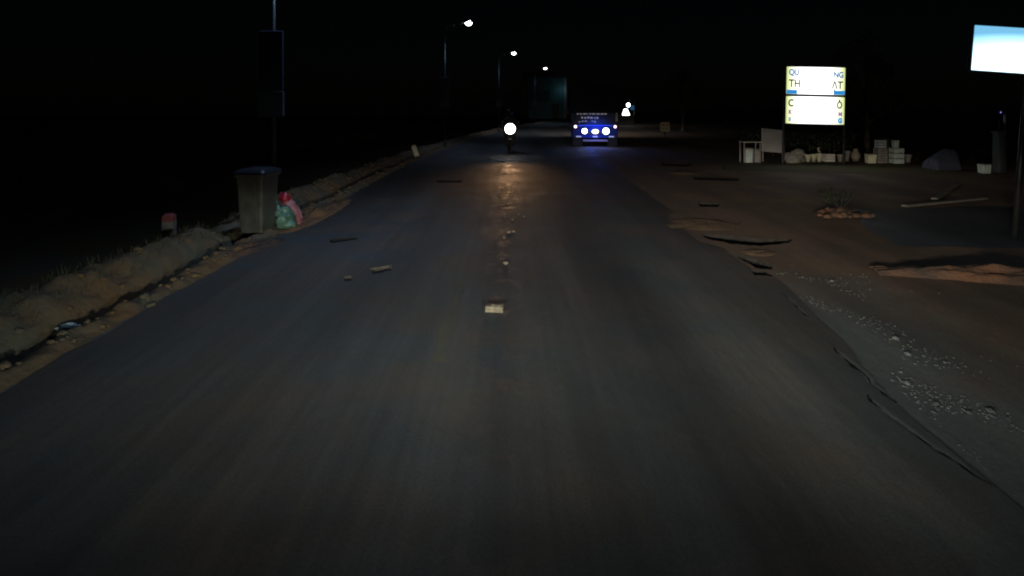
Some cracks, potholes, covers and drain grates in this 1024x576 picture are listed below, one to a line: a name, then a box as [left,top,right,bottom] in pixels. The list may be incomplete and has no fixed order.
pothole [668,218,793,246]
crack [825,340,993,485]
